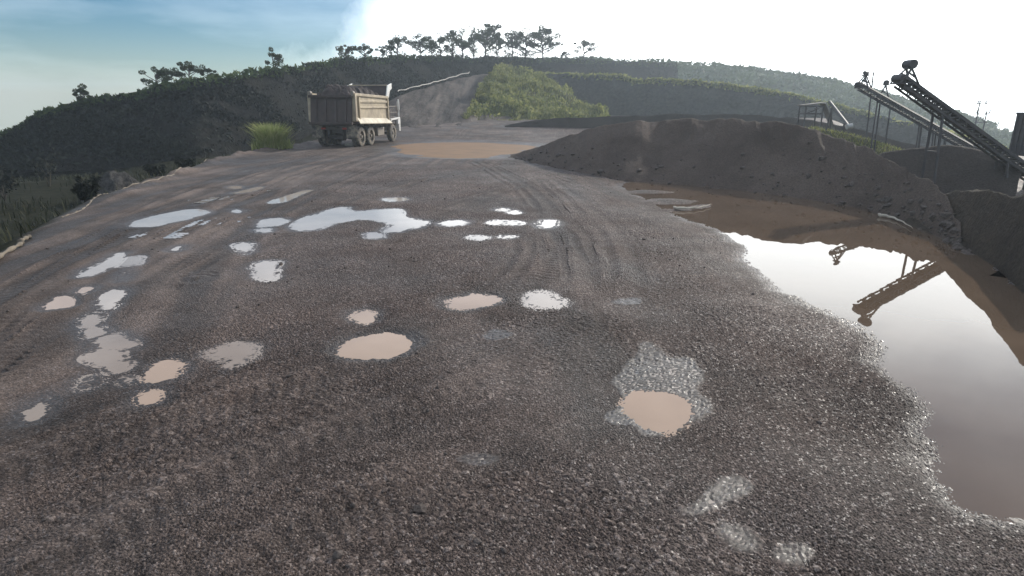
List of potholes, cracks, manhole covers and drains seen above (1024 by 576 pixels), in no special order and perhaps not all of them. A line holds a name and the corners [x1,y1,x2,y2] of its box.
pothole [130,388,166,407]
pothole [94,303,120,312]
pothole [76,348,131,369]
pothole [76,252,129,278]
pothole [534,219,560,229]
pothole [41,294,78,311]
pothole [11,394,61,425]
pothole [346,309,378,326]
pothole [84,332,143,352]
pothole [77,326,114,340]
pothole [73,311,110,330]
